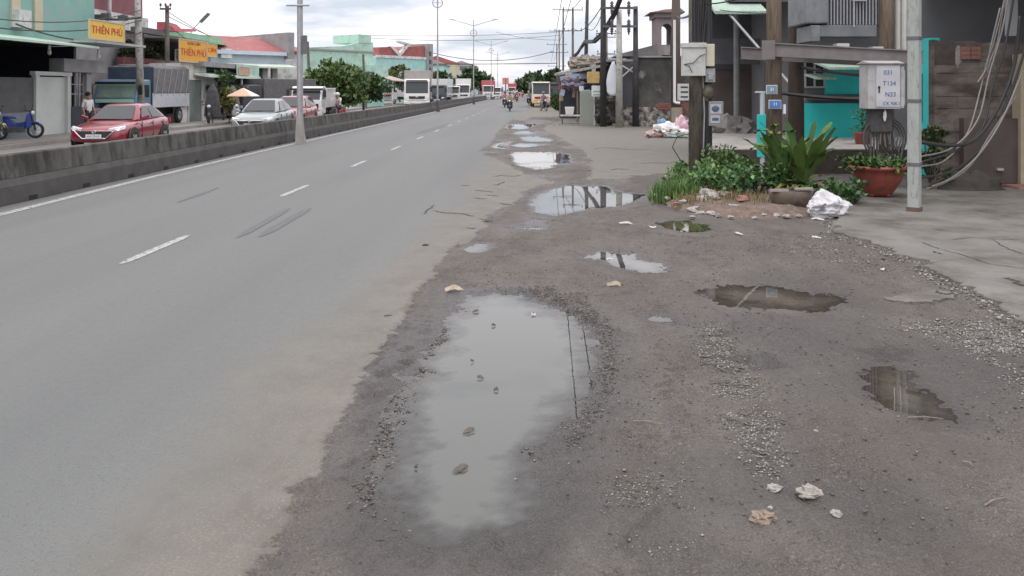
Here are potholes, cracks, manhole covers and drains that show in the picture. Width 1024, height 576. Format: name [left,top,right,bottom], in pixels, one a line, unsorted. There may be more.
pothole [509,150,573,170]
pothole [649,218,719,234]
pothole [847,360,971,429]
pothole [459,241,497,253]
pothole [491,141,515,149]
pothole [579,250,674,273]
crack [920,237,1023,285]
pothole [527,184,650,216]
pothole [691,281,860,314]
pothole [359,290,610,557]
crack [424,175,520,229]
